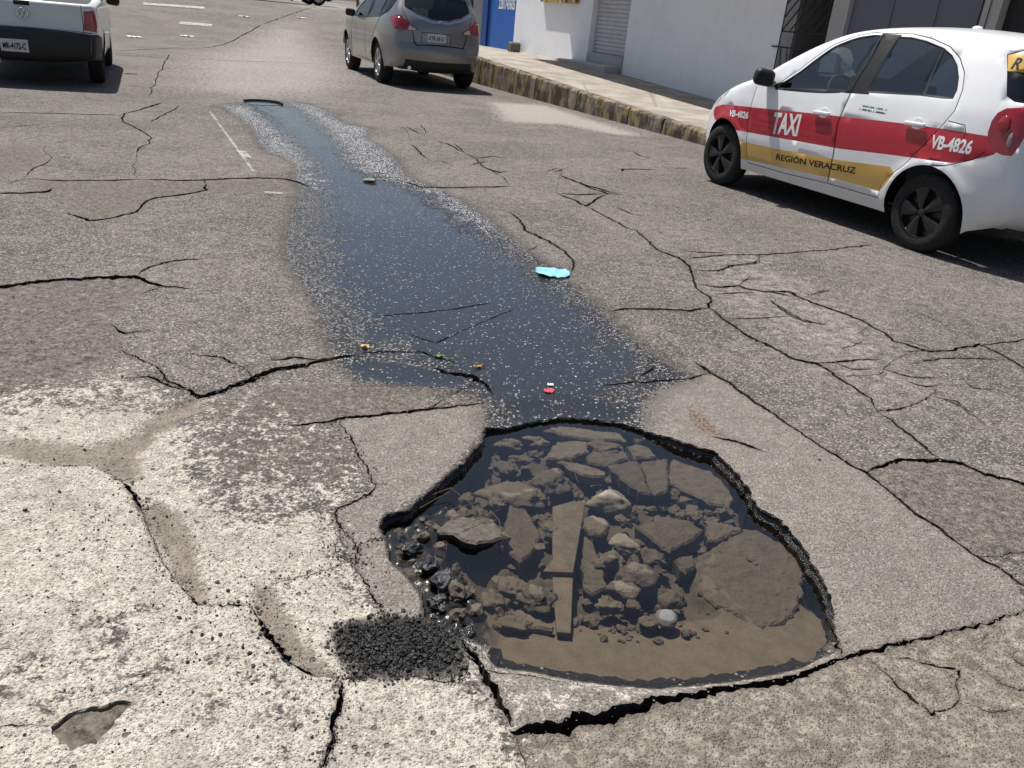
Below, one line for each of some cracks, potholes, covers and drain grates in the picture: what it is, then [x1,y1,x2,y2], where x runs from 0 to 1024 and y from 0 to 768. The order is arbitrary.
crack [510,152,1024,486]
crack [0,258,517,618]
crack [42,465,364,768]
crack [0,6,335,221]
pothole [379,417,838,681]
crack [409,610,1024,768]
crack [399,125,511,188]
pothole [51,700,132,751]
